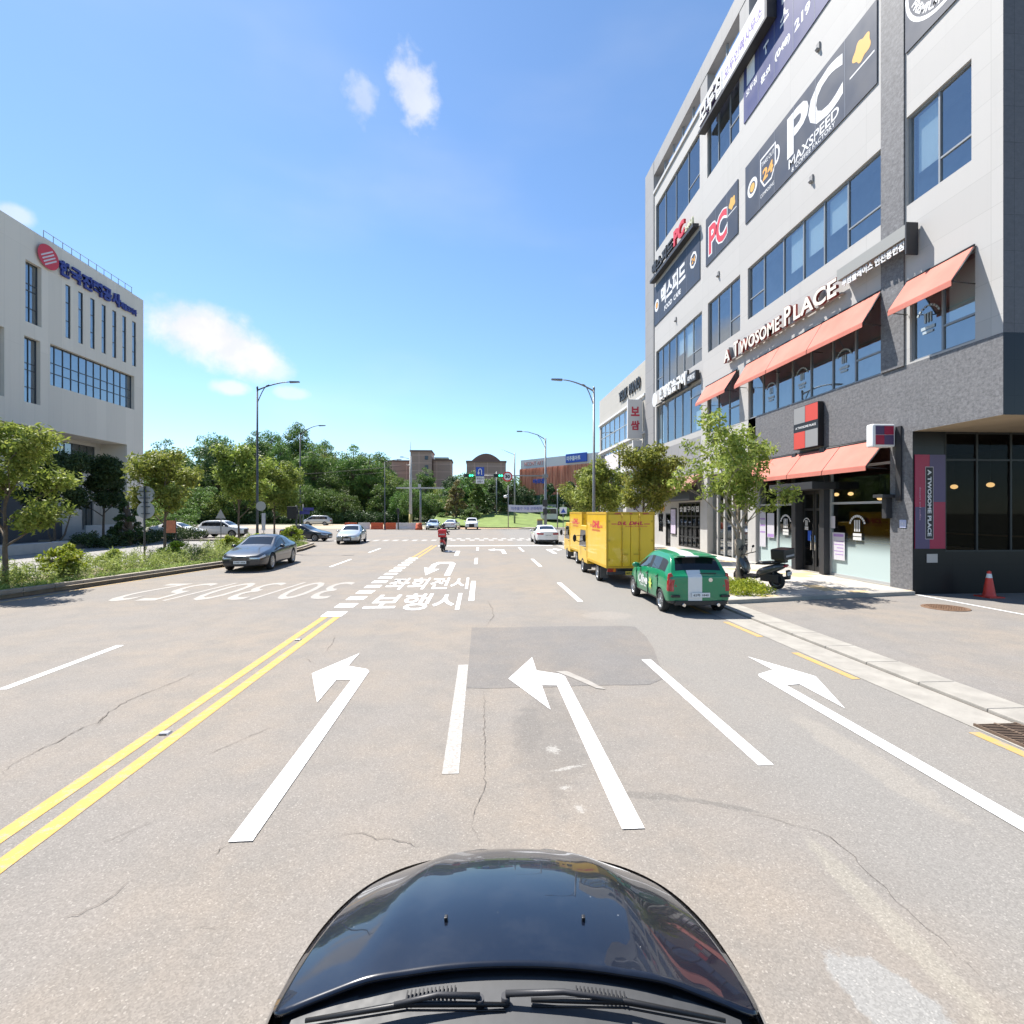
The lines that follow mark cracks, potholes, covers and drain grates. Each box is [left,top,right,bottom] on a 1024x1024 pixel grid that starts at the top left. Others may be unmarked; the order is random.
crack [8,674,190,768]
manhole cover [920,604,972,612]
drain grate [973,722,1024,747]
crack [472,698,486,838]
